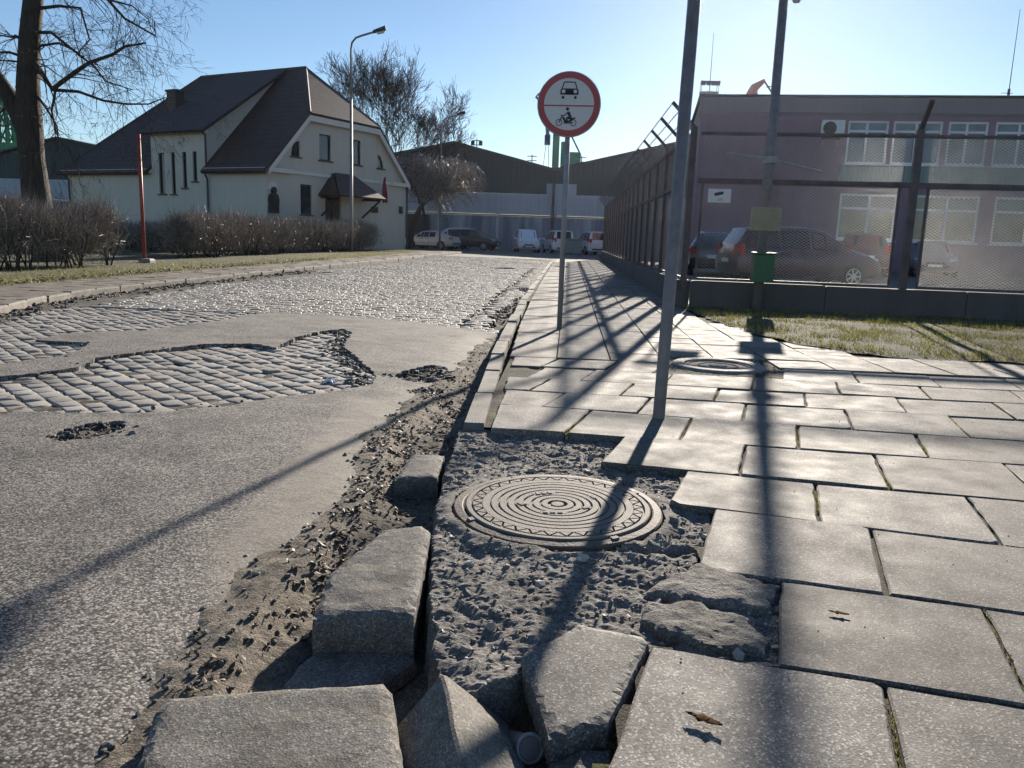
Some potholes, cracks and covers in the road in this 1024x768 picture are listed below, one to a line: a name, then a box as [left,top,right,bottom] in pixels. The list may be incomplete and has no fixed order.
pothole [0,330,385,413]
manhole cover [671,357,766,374]
pothole [384,365,456,383]
manhole cover [453,474,662,552]
pothole [47,420,140,441]
